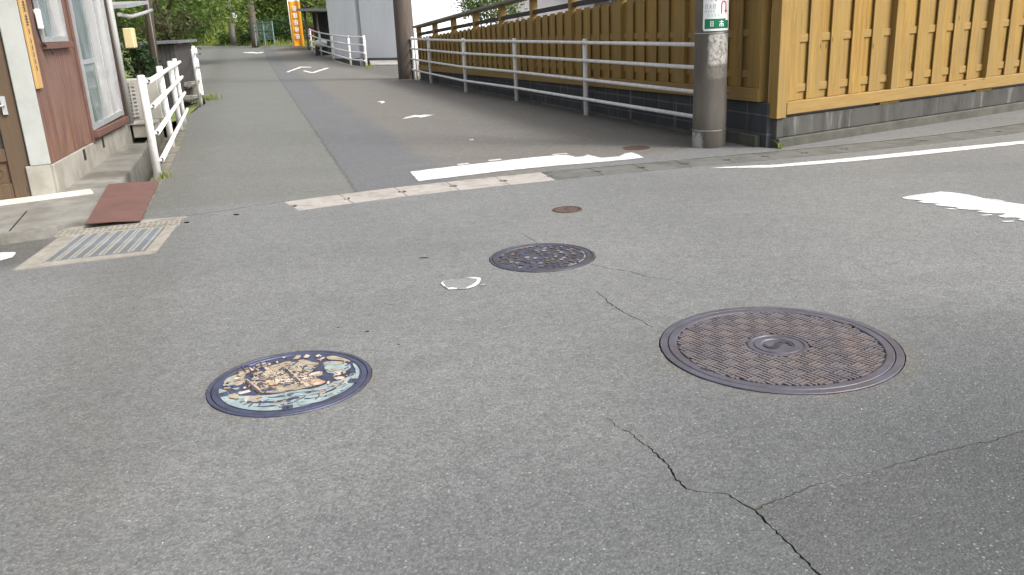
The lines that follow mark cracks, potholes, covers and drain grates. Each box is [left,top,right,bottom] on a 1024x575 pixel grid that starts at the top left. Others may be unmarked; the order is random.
manhole cover [206,350,372,418]
drain grate [54,219,182,237]
manhole cover [659,307,906,395]
crack [609,419,1024,575]
manhole cover [490,243,595,273]
